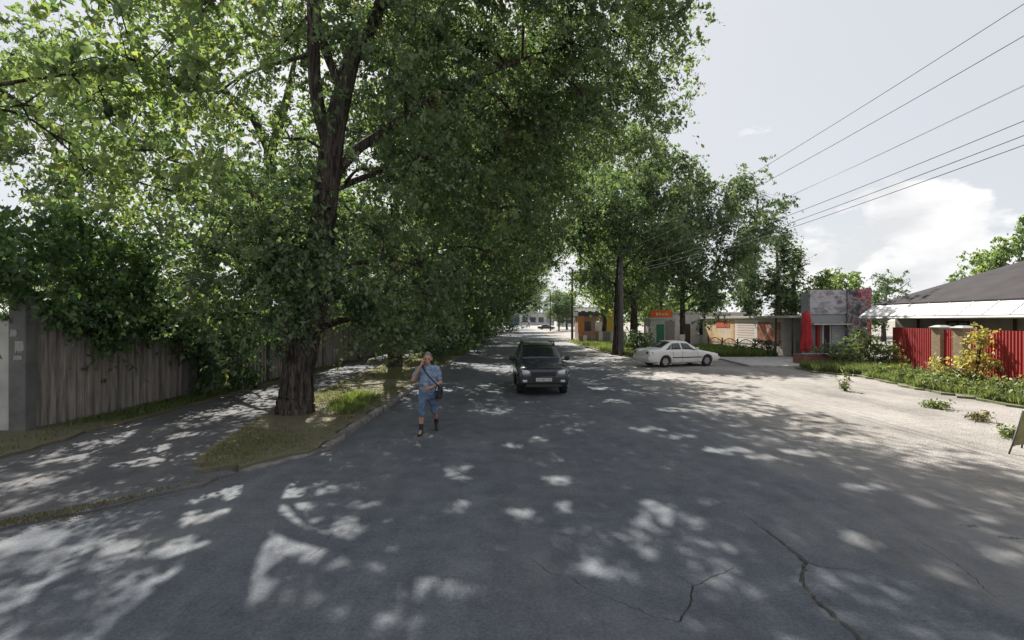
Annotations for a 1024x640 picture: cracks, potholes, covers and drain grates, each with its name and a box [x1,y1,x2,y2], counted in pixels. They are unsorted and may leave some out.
crack [532,513,880,640]
crack [917,539,991,594]
